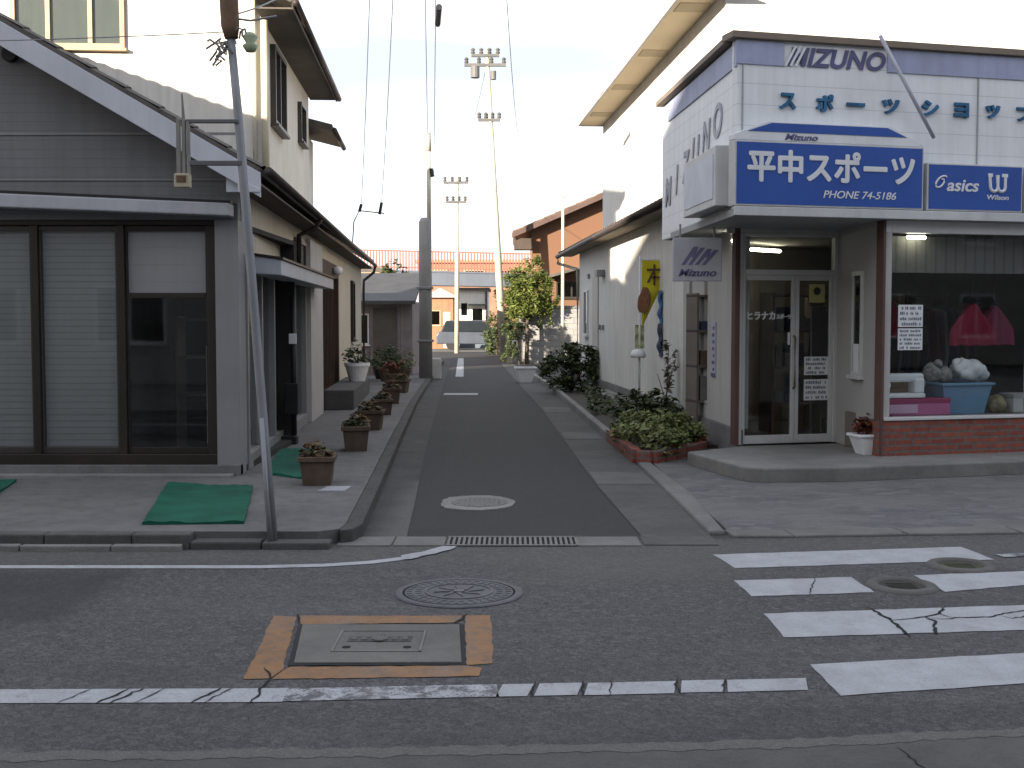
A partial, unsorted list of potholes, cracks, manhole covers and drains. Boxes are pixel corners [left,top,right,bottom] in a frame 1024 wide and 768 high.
crack [190,667,271,705]
manhole cover [288,624,466,666]
crack [865,606,1024,638]
manhole cover [441,495,515,511]
crack [57,687,164,703]
manhole cover [394,578,524,609]
